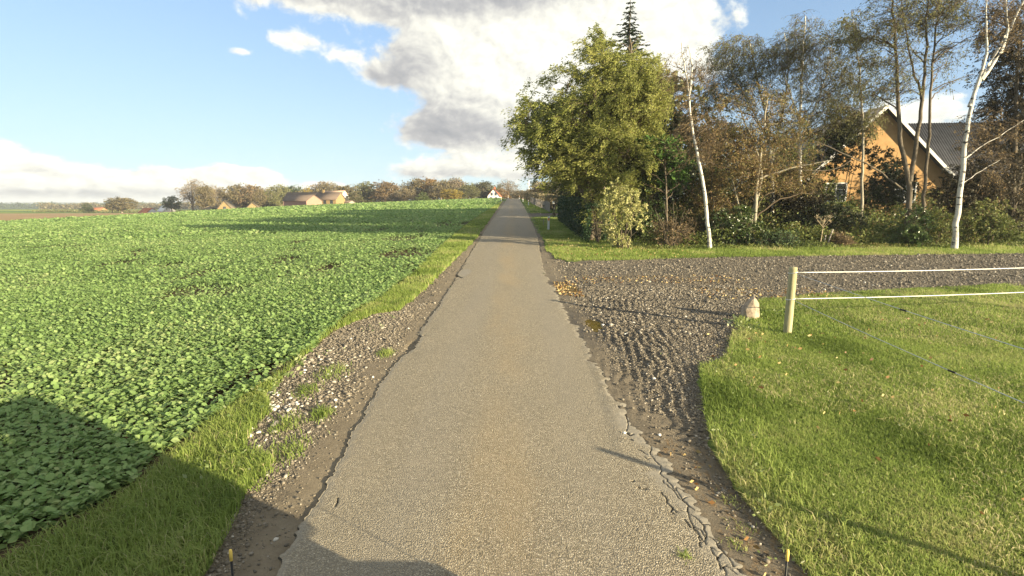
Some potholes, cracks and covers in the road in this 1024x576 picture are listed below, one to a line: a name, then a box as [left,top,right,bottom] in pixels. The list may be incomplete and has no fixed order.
crack [626,416,733,572]
